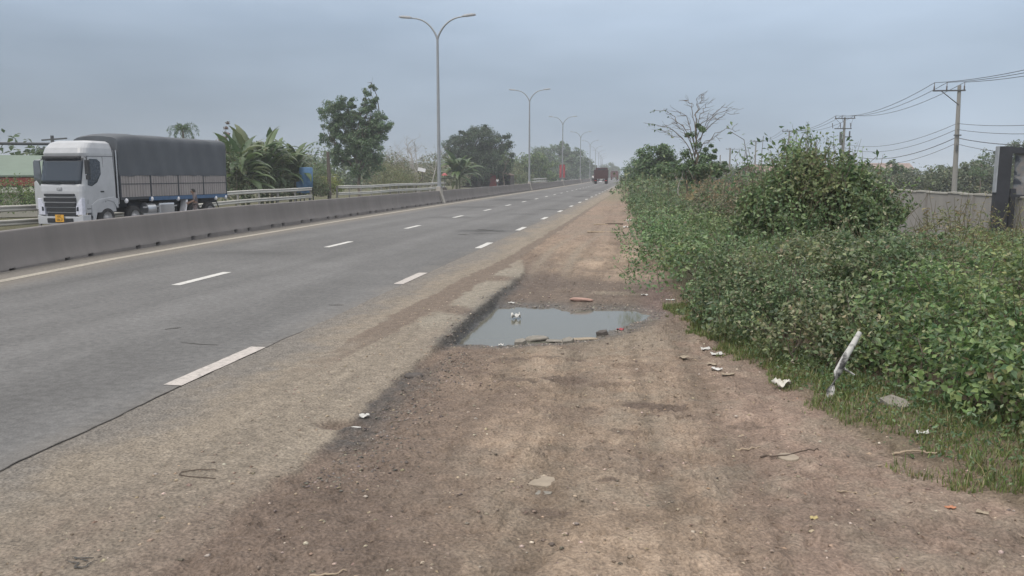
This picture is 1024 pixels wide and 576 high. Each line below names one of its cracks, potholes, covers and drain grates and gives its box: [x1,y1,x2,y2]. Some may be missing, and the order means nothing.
pothole [446,298,661,348]
